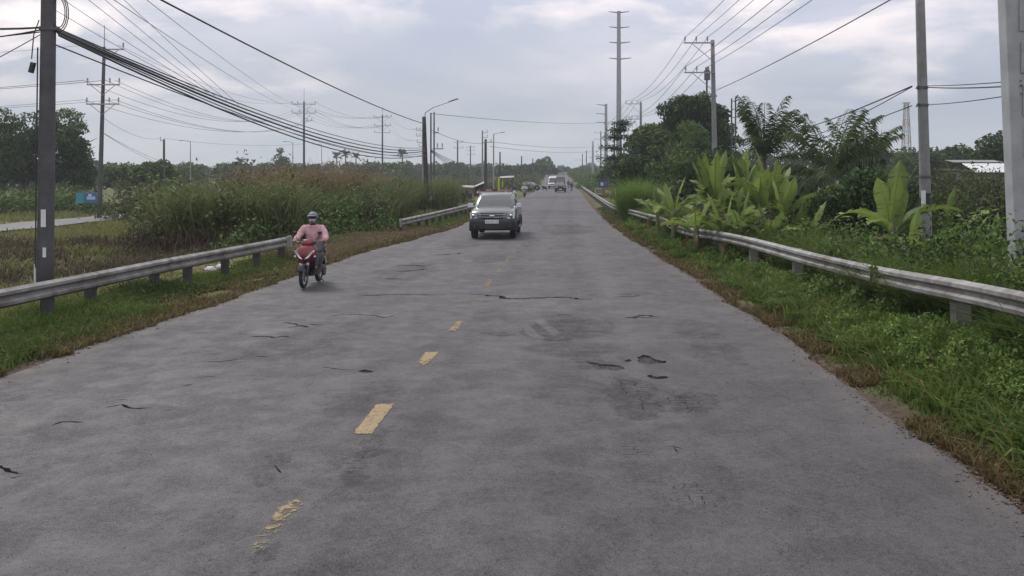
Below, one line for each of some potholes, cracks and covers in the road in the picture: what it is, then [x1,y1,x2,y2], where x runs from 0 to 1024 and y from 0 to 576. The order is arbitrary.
crack [0,465,20,478]
pothole [586,361,625,371]
pothole [637,355,666,364]
crack [362,265,446,296]
crack [103,399,150,409]
crack [252,322,316,357]
